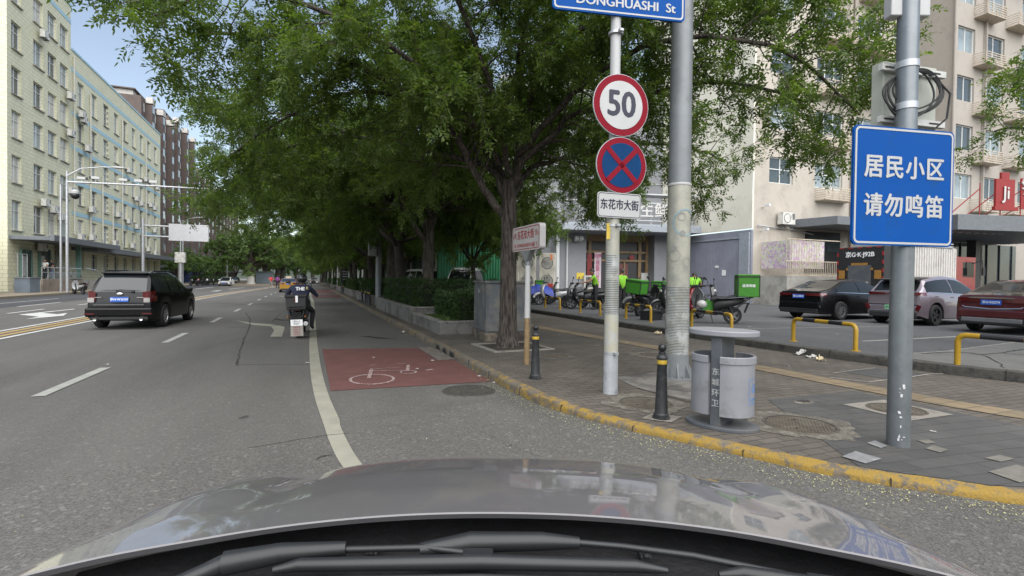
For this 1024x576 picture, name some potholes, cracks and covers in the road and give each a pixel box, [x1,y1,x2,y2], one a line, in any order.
manhole cover [442,385,495,397]
crack [921,349,1024,368]
manhole cover [844,400,953,420]
manhole cover [601,393,689,415]
manhole cover [747,411,861,441]
